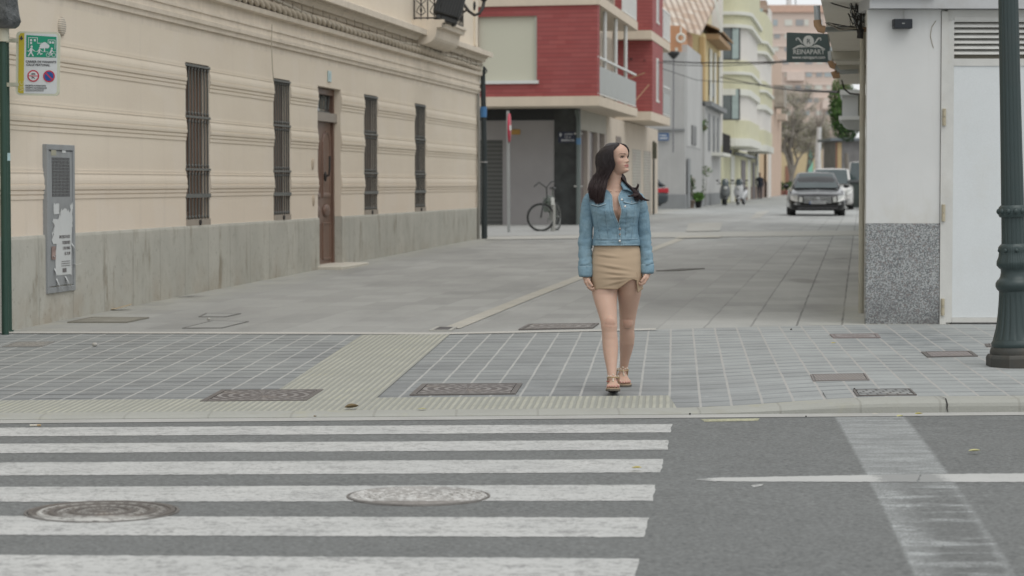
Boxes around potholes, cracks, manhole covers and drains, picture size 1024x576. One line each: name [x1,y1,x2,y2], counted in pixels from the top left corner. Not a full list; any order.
manhole cover [346,486,490,506]
manhole cover [410,383,522,396]
manhole cover [200,389,324,402]
manhole cover [24,500,180,523]
manhole cover [810,373,870,382]
